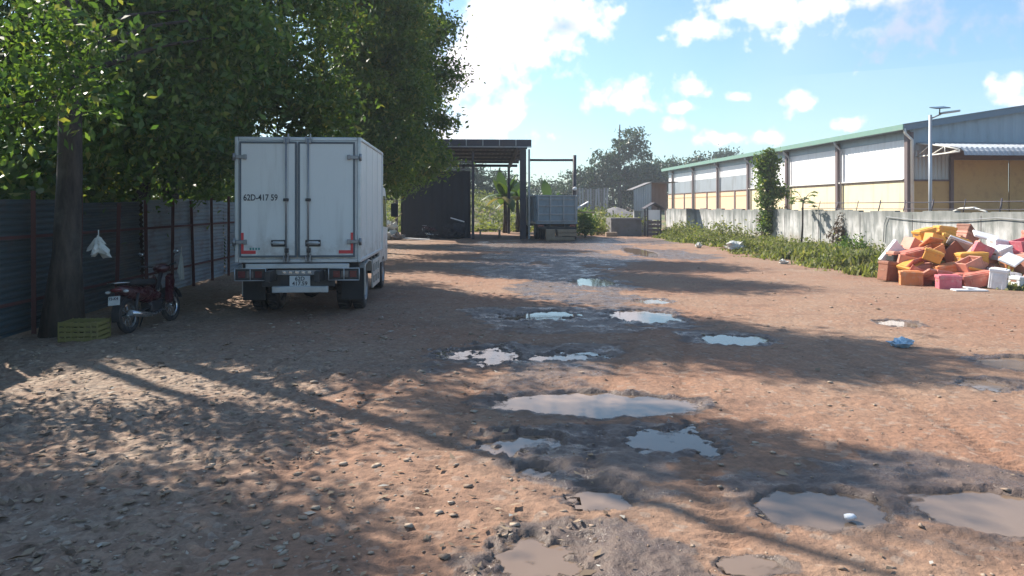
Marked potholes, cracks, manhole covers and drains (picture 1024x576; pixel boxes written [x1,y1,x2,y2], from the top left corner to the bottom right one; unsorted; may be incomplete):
pothole [560,488,645,512]
pothole [456,524,595,576]
pothole [497,308,585,323]
pothole [599,307,688,324]
pothole [965,353,1024,372]
pothole [898,483,1024,539]
pothole [565,276,621,288]
pothole [715,553,803,576]
pothole [466,424,581,459]
pothole [473,387,708,420]
pothole [421,341,534,368]
pothole [749,483,898,531]
